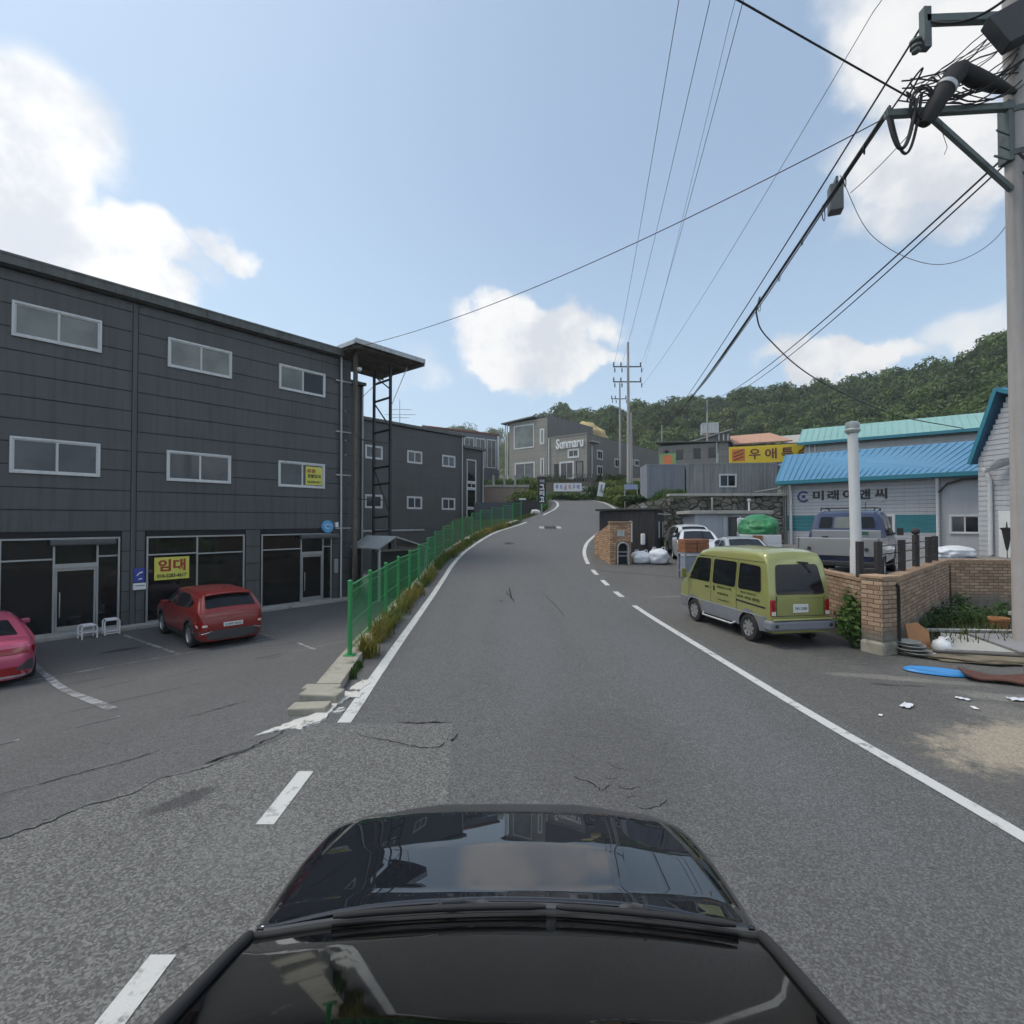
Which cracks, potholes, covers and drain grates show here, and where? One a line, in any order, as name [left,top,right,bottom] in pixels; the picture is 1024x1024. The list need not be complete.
crack [0,730,287,839]
crack [359,721,458,748]
crack [569,755,667,809]
